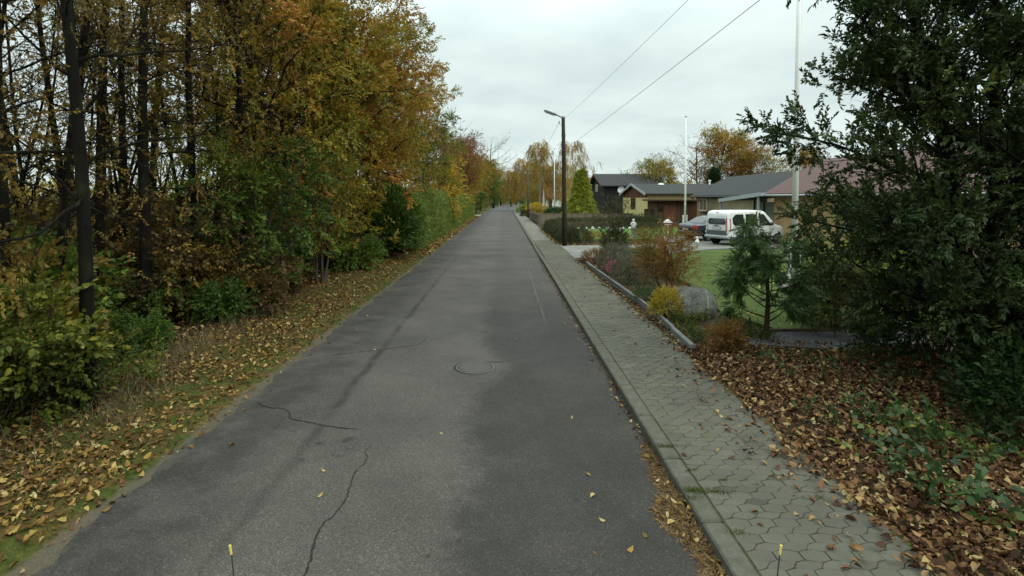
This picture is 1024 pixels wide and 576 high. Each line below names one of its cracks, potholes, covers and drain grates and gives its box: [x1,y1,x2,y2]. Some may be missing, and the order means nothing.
manhole cover [454,361,503,374]
crack [257,401,371,576]
